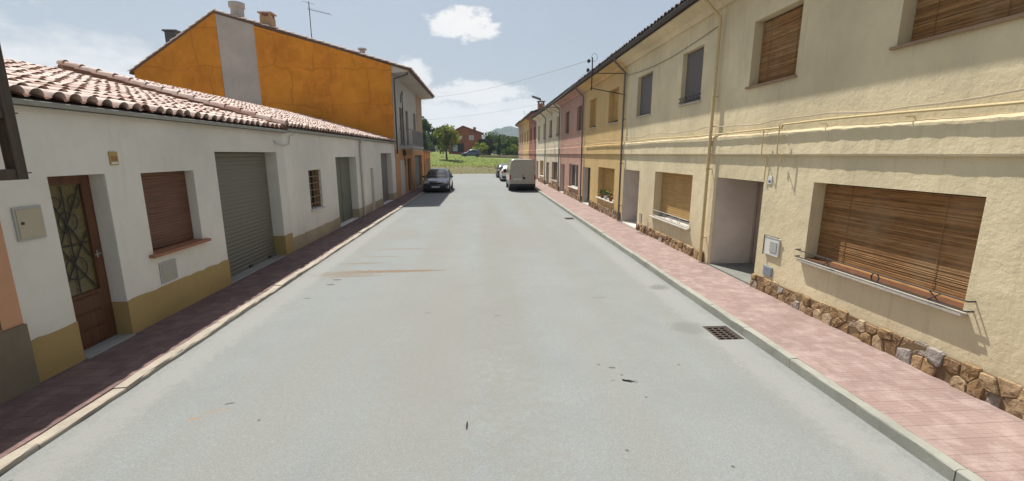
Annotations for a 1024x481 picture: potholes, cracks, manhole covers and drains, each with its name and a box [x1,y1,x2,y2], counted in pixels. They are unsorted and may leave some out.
drain grate [702,326,744,340]
